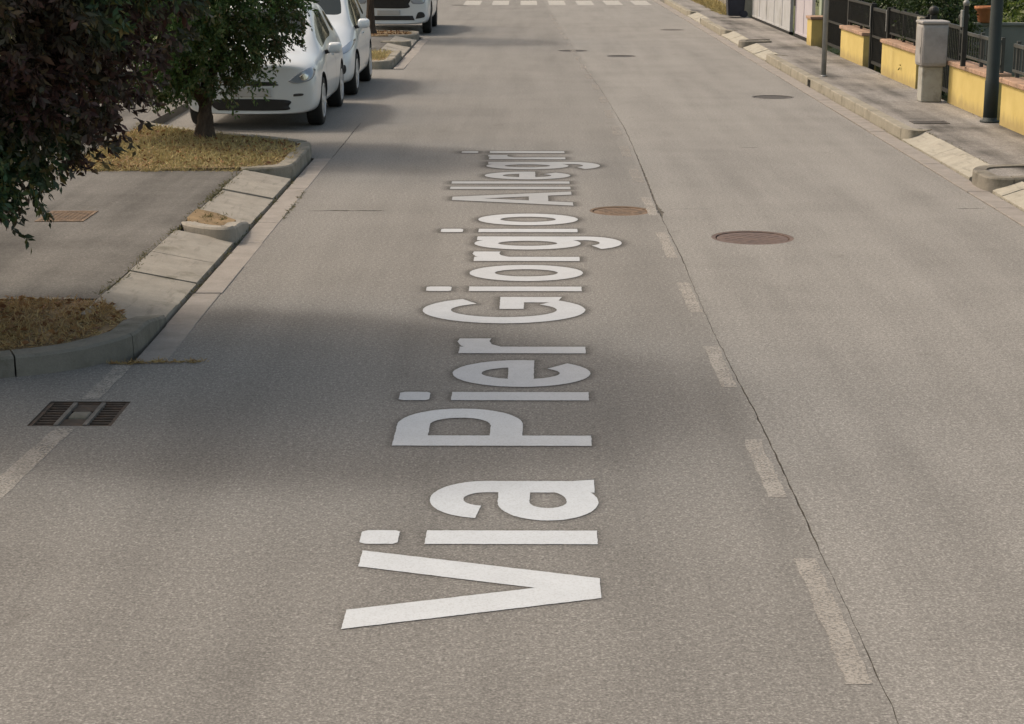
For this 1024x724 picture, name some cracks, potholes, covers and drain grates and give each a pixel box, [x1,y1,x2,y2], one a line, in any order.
drain grate [28,402,130,426]
manhole cover [711,231,794,245]
manhole cover [590,206,649,216]
